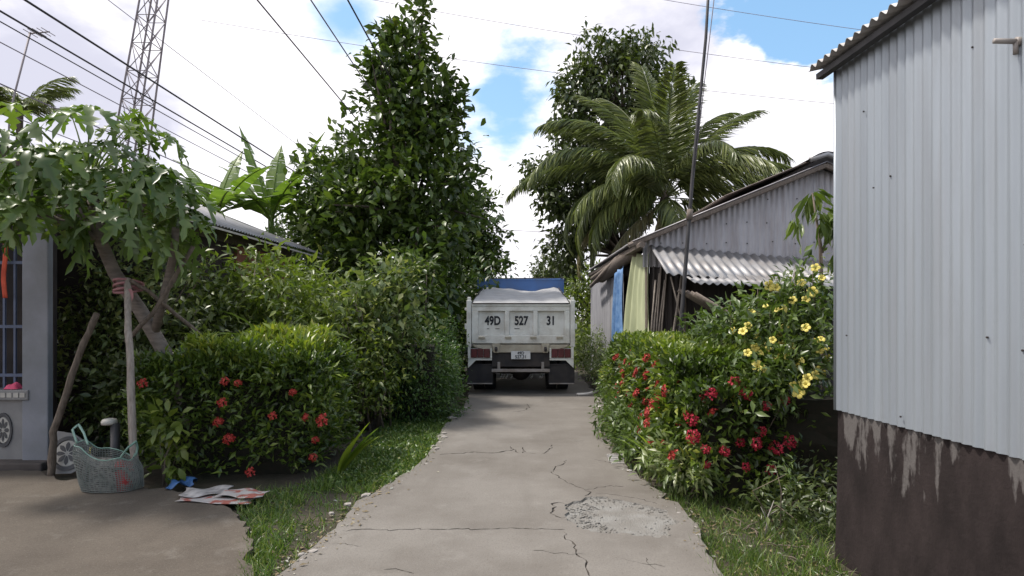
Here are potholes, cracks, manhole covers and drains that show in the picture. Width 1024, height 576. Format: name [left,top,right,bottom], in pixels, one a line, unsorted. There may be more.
pothole [565,496,679,538]
crack [440,445,654,576]
